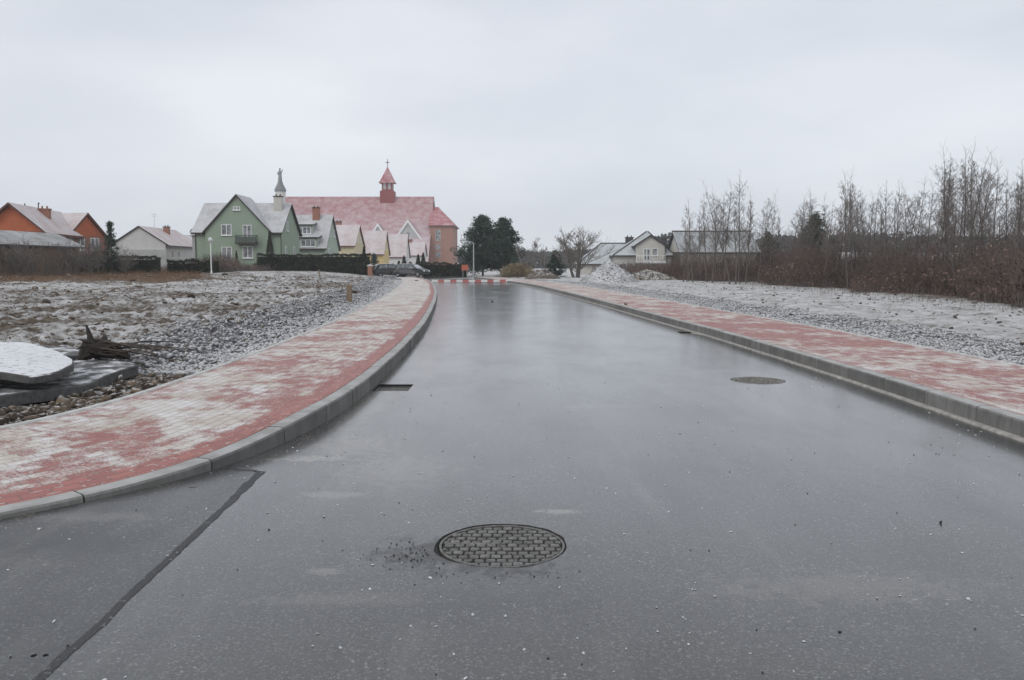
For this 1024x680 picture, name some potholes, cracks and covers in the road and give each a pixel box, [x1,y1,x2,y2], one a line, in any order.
manhole cover [731,376,785,384]
manhole cover [434,524,567,567]
